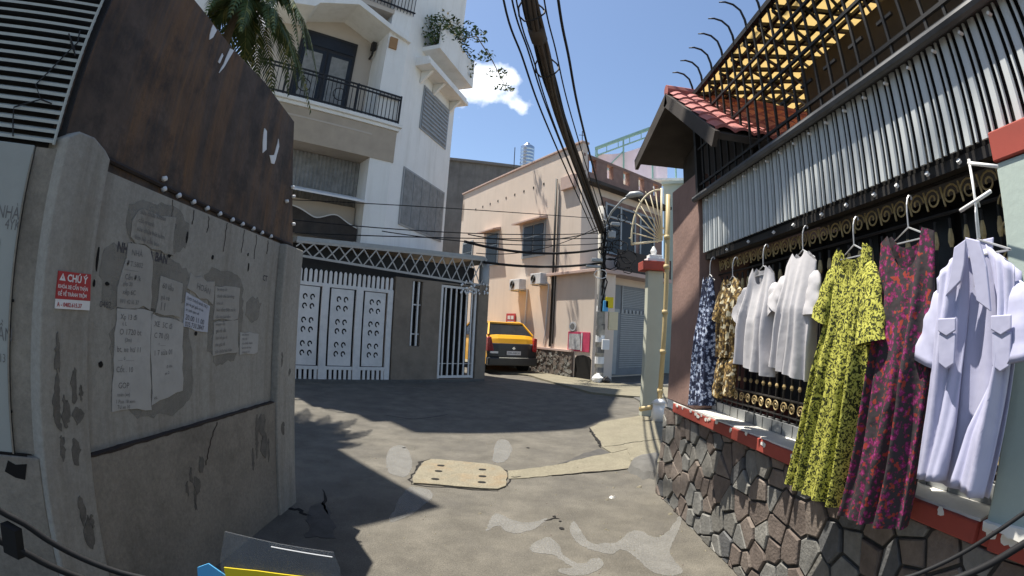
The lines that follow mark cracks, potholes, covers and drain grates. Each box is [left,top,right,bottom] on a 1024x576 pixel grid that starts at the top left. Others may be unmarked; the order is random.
crack [288,489,328,516]
manhole cover [413,459,508,490]
crack [589,428,660,448]
